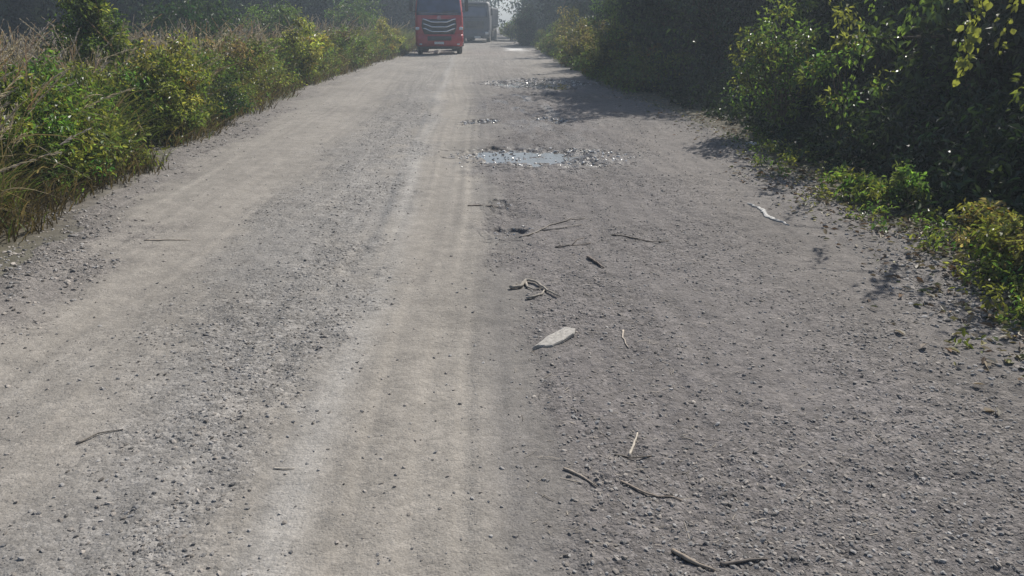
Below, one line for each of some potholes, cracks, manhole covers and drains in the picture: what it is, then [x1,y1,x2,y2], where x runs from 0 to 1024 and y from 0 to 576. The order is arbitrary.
pothole [435,143,647,171]
pothole [470,77,597,90]
pothole [529,115,574,124]
pothole [475,196,521,217]
